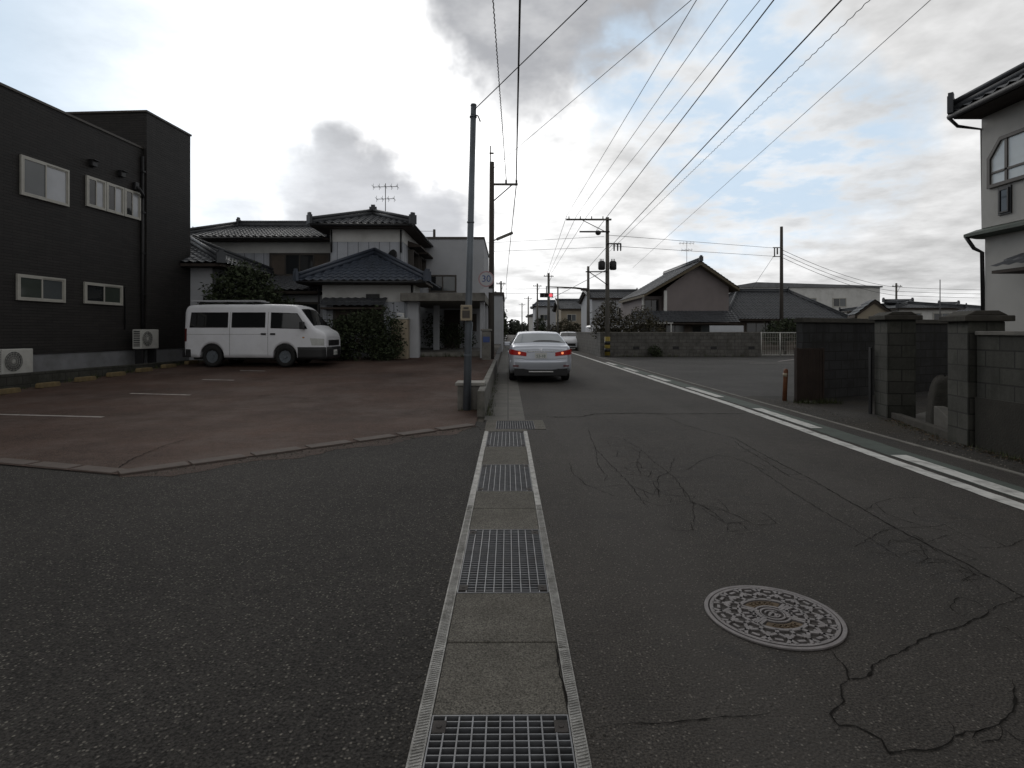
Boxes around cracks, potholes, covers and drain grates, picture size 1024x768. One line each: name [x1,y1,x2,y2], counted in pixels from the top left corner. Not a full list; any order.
drain grate [477,464,533,491]
drain grate [457,529,549,594]
manhole cover [704,585,848,651]
crack [569,413,776,534]
crack [602,713,769,727]
drain grate [422,714,576,768]
drain grate [486,432,526,447]
crack [666,417,1024,753]
drain grate [496,421,535,430]
